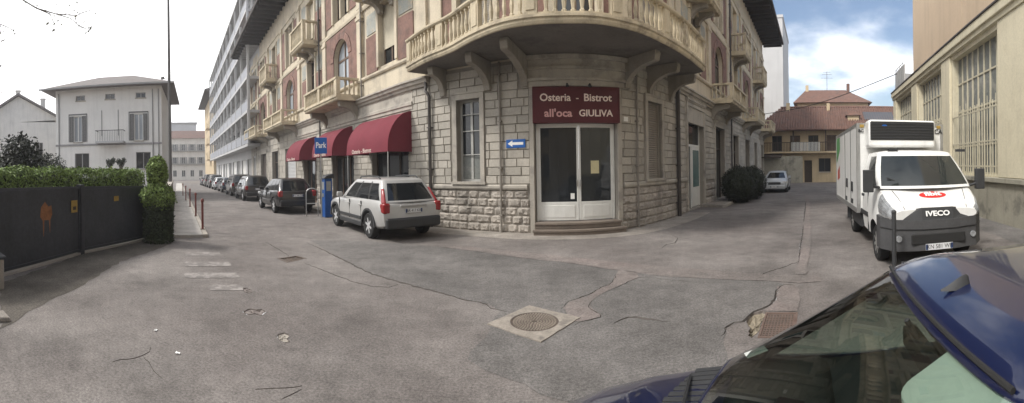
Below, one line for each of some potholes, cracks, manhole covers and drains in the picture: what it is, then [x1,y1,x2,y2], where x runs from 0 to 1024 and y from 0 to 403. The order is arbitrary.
crack [720,203,806,337]
pothole [746,311,766,338]
crack [266,242,507,312]
crack [564,276,700,325]
manhole cover [487,305,580,343]
